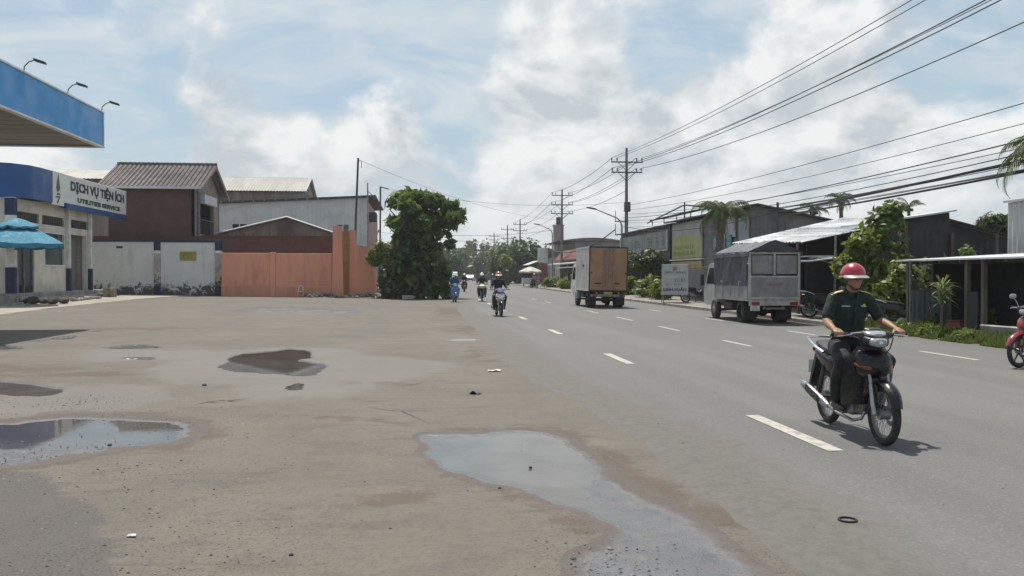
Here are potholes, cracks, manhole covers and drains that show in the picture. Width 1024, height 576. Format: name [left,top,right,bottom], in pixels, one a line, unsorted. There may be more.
pothole [0,413,208,470]
pothole [0,381,68,397]
pothole [217,348,327,376]
pothole [412,427,778,576]
